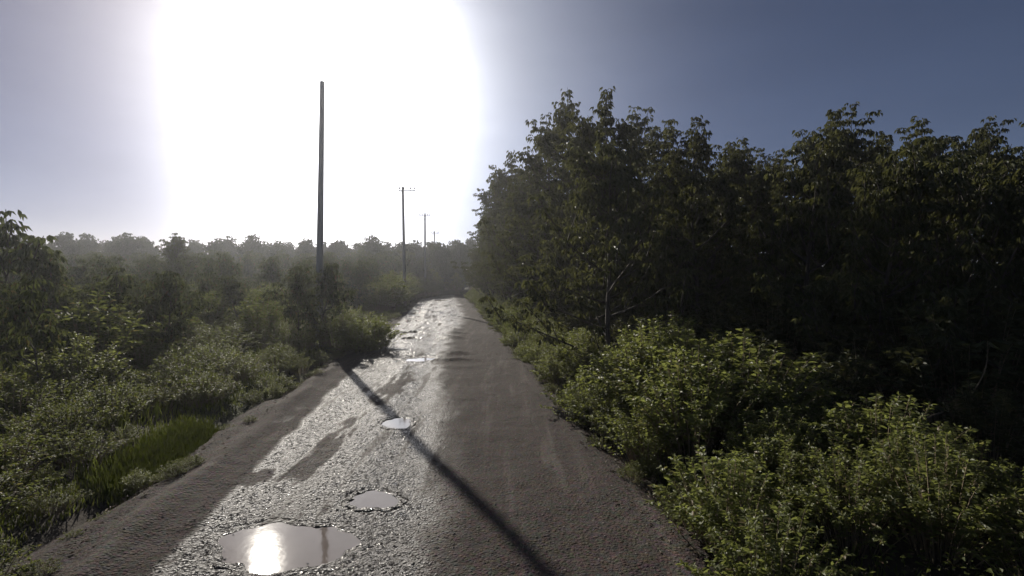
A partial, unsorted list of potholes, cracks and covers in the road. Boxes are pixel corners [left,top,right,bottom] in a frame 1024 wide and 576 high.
pothole [342,488,408,512]
pothole [377,415,416,430]
pothole [398,355,443,363]
pothole [202,518,380,576]
